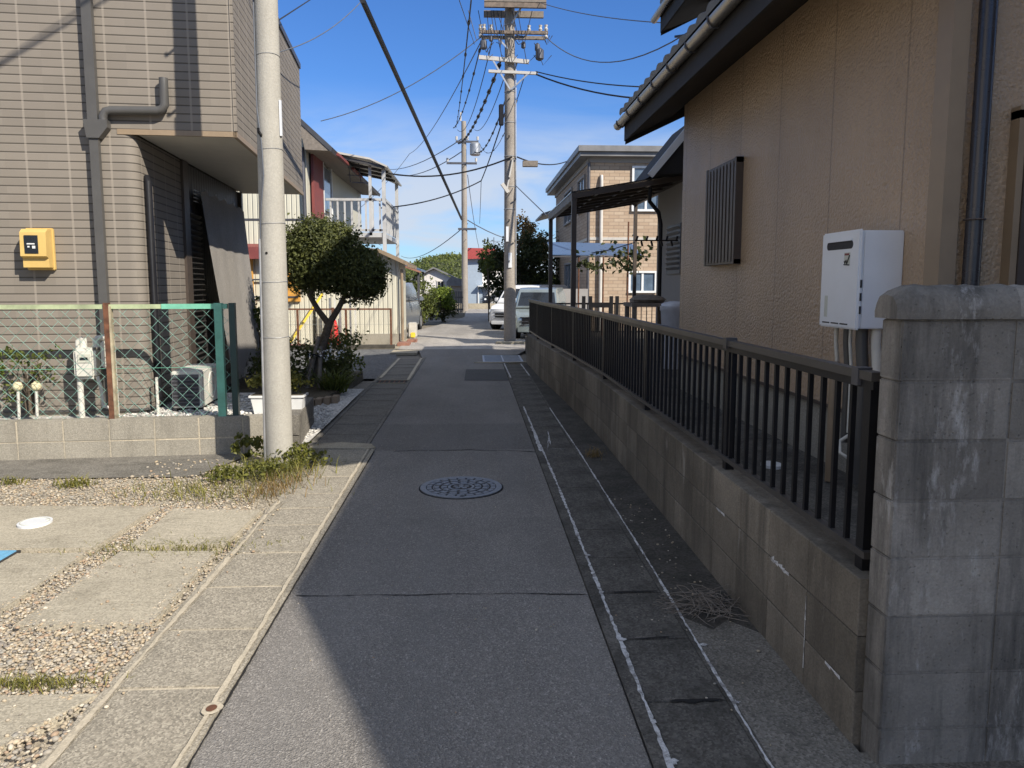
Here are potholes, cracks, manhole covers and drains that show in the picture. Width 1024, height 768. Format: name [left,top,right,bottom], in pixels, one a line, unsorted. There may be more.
utility cover [16,516,53,529]
manhole cover [419,476,503,499]
